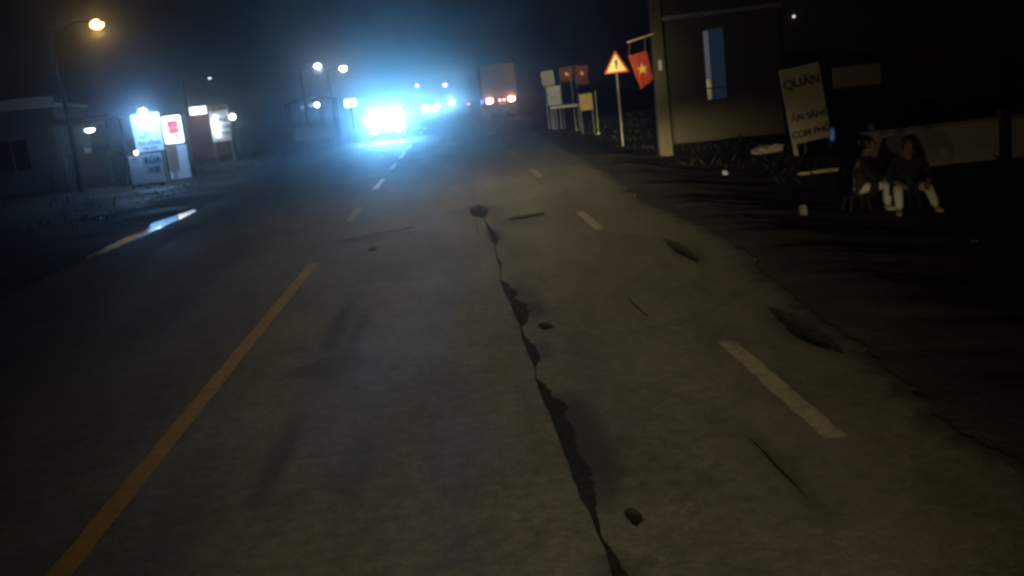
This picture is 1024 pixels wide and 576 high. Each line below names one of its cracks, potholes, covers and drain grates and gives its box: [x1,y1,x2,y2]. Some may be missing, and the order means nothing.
pothole [767,307,845,354]
pothole [663,239,700,263]
crack [749,438,809,500]
crack [332,226,413,242]
pothole [470,204,488,218]
pothole [624,508,643,526]
